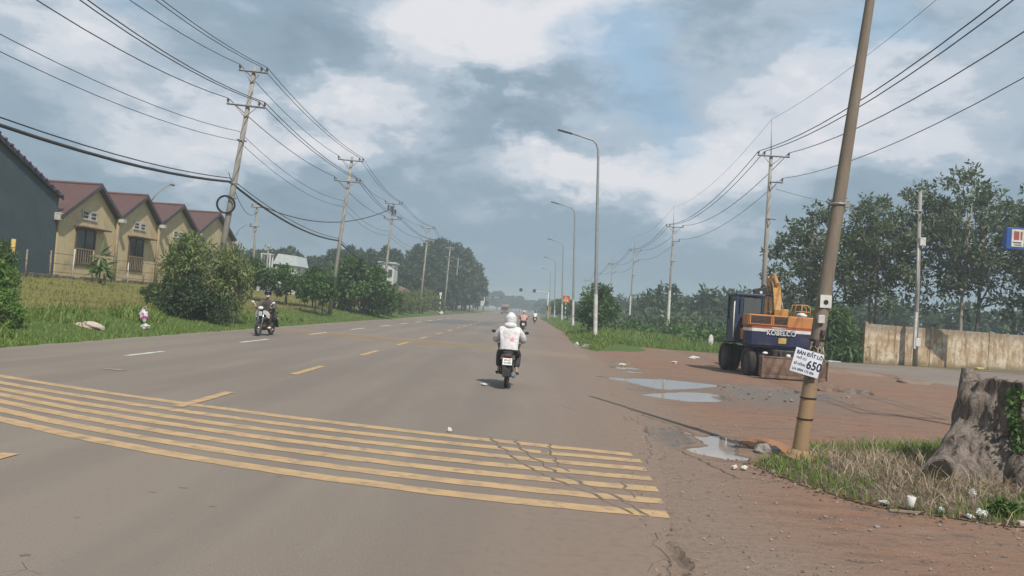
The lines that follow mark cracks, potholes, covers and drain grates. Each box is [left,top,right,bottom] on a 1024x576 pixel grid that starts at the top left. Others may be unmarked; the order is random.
pothole [668,543,695,576]
crack [624,417,652,464]
crack [490,437,648,516]
pothole [672,425,754,461]
